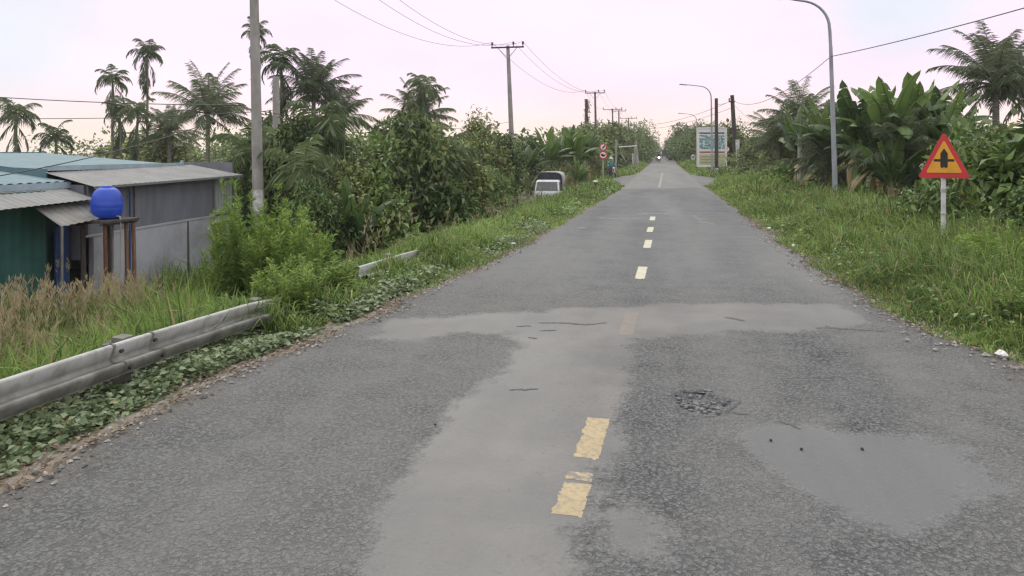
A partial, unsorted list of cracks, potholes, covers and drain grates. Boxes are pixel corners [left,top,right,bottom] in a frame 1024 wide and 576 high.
pothole [661,389,742,418]
crack [519,322,607,339]
